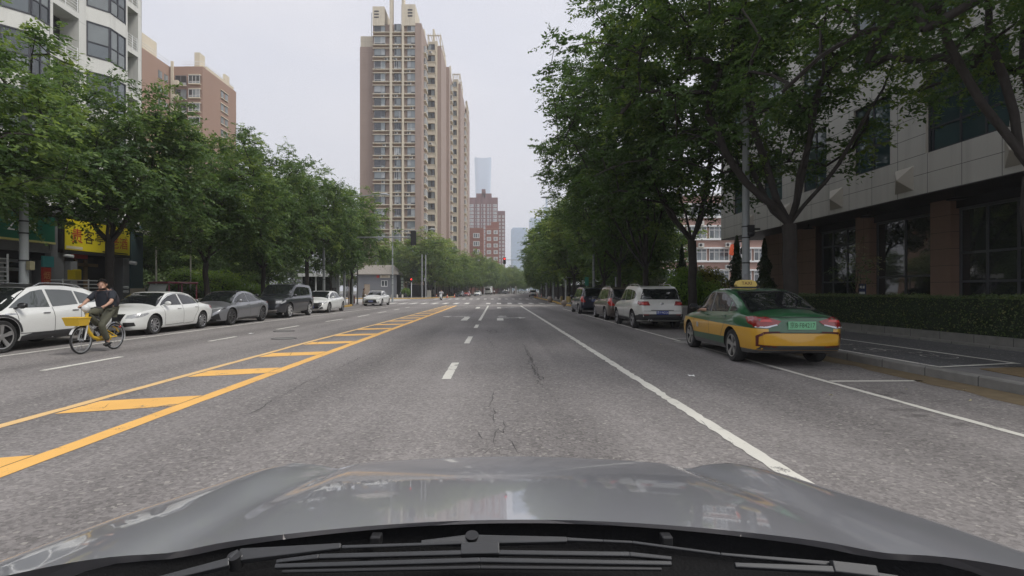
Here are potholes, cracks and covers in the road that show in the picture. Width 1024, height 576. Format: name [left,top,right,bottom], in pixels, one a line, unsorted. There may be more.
crack [478,392,519,455]
crack [457,331,545,388]
